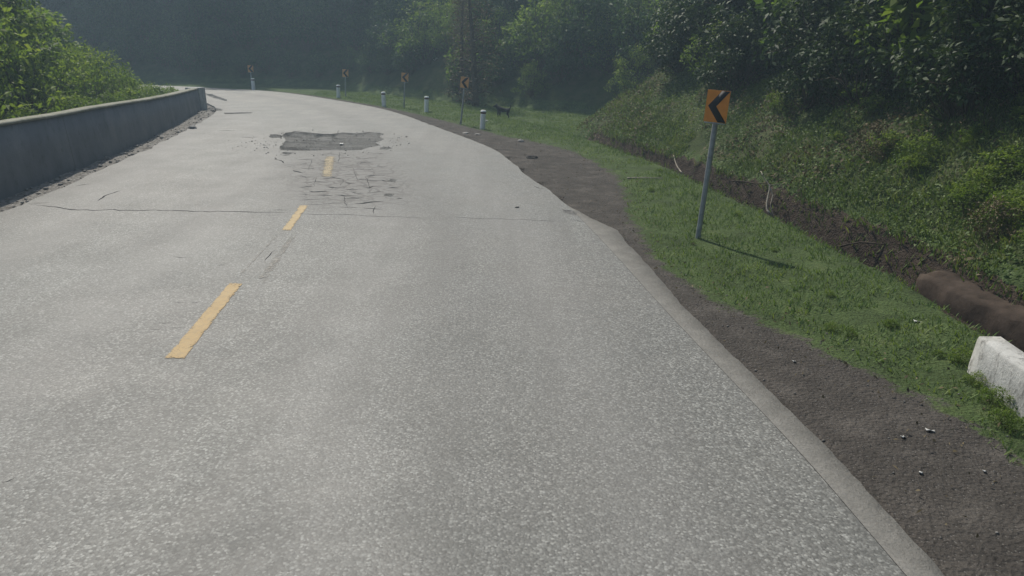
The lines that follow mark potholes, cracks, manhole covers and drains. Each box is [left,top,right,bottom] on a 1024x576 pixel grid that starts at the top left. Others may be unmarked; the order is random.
crack [31,184,283,213]
crack [255,145,422,218]
